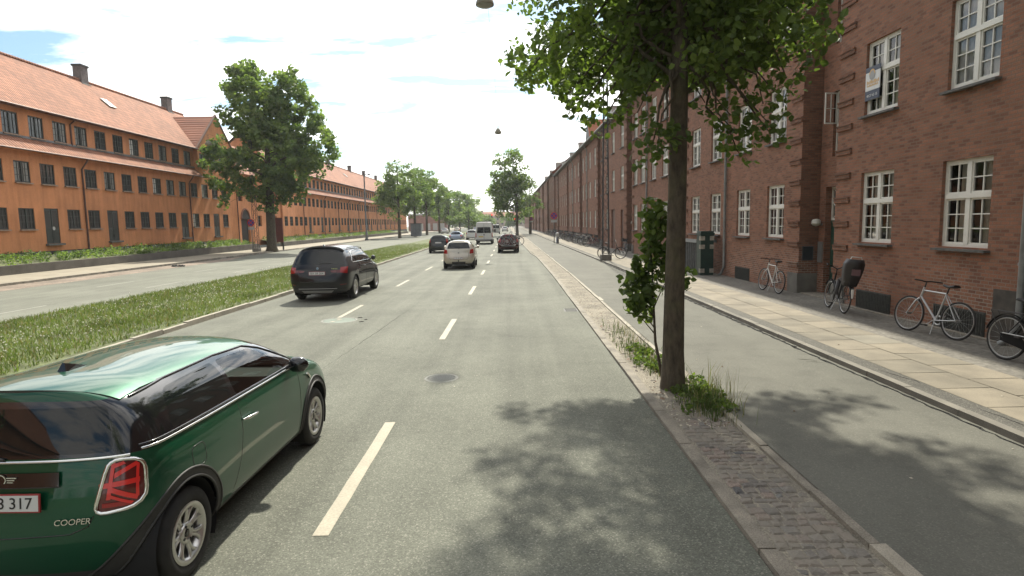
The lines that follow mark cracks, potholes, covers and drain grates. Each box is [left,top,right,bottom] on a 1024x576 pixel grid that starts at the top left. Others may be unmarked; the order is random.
manhole cover [425,374,458,382]
